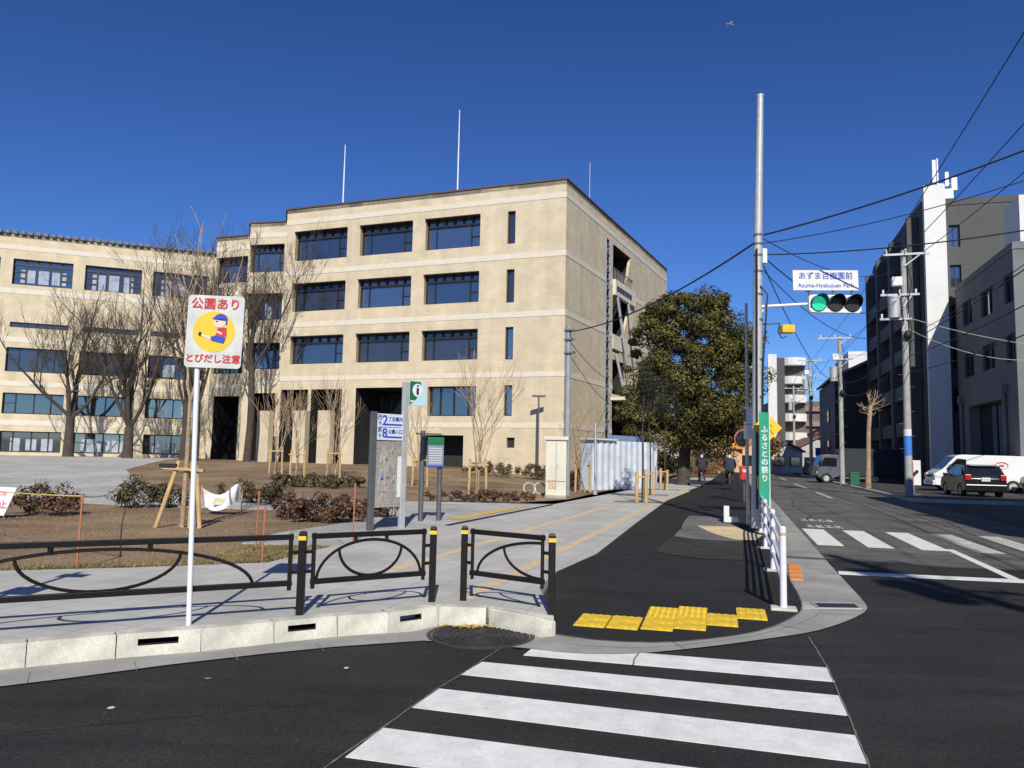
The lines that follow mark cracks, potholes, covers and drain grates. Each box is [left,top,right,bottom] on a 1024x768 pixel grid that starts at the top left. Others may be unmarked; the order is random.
manhole cover [426,623,535,650]
